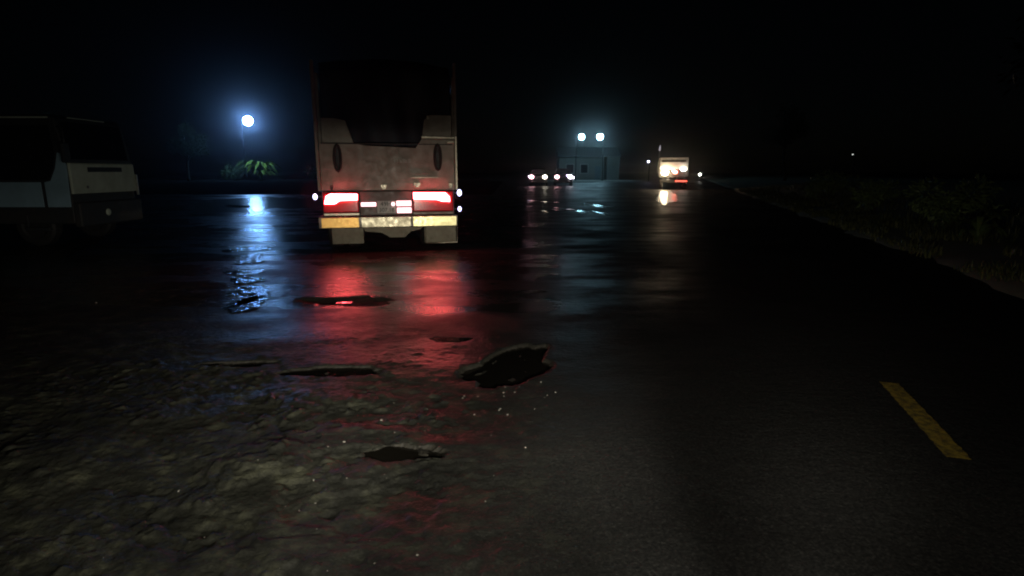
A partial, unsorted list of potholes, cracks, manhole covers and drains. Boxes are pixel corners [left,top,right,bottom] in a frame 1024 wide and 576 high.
pothole [447,341,558,392]
pothole [196,360,287,368]
pothole [289,295,400,308]
pothole [267,364,394,377]
pothole [355,442,453,463]
